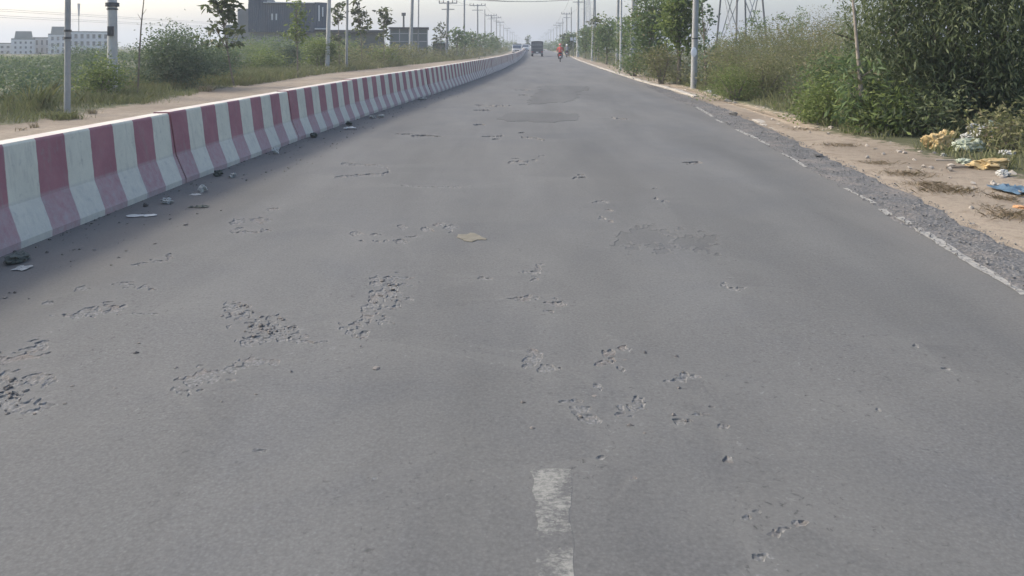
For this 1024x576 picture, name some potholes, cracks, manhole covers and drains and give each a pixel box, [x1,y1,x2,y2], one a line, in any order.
pothole [614,395,648,418]
pothole [767,520,809,538]
pothole [229,208,280,234]
pothole [742,509,769,562]
pothole [170,356,280,397]
pothole [338,272,420,339]
pothole [609,223,722,256]
pothole [558,399,602,424]
pothole [350,223,459,244]
pothole [521,348,562,373]
pothole [0,364,59,415]
pothole [222,301,309,347]
